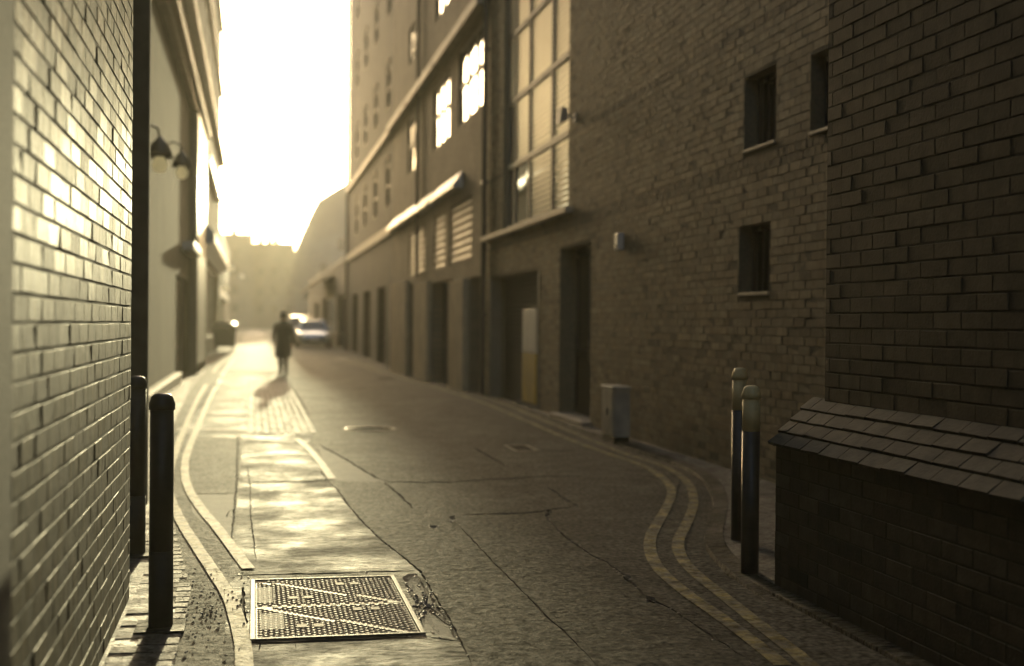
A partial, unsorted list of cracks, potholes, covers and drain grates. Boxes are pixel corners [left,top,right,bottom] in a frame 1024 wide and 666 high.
pothole [403,574,459,640]
manhole cover [250,575,426,643]
